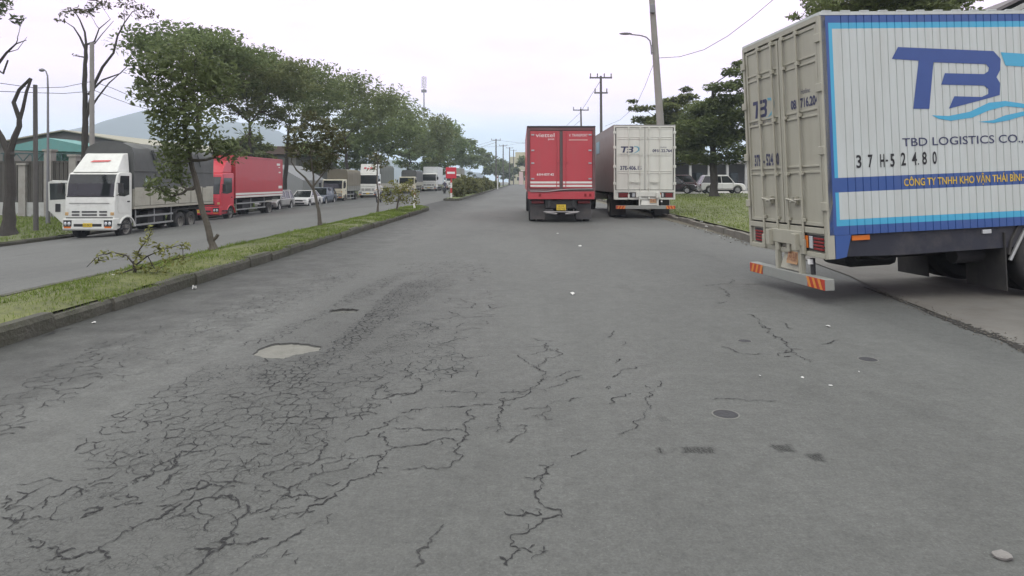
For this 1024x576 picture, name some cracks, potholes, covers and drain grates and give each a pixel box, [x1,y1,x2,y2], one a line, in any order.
crack [499,465,563,565]
crack [488,338,583,442]
crack [3,261,507,574]
crack [722,314,805,360]
crack [606,331,662,434]
manhole cover [711,409,740,419]
